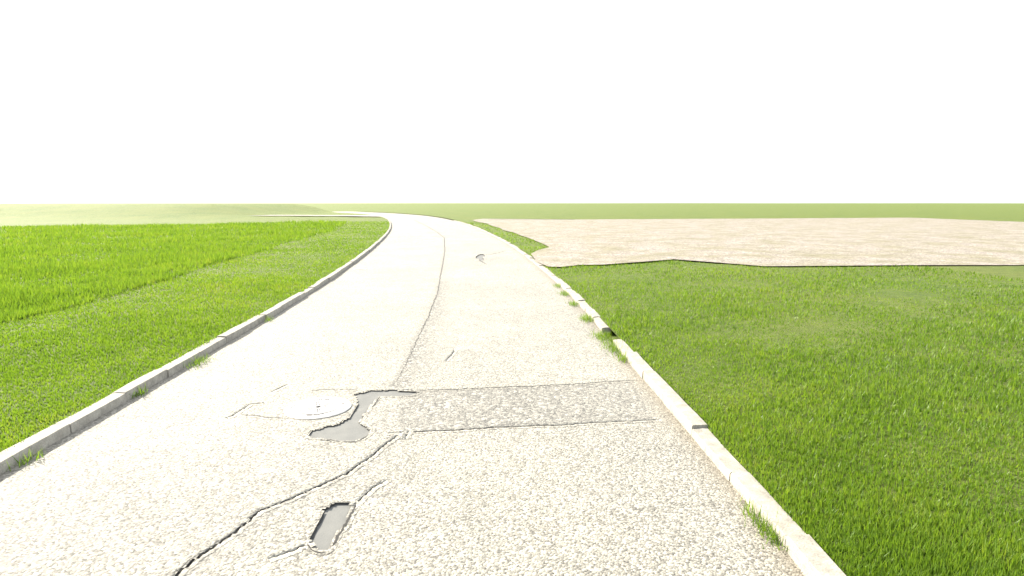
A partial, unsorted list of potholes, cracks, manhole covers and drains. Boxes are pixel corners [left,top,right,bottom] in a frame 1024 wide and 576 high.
manhole cover [284,397,352,420]
